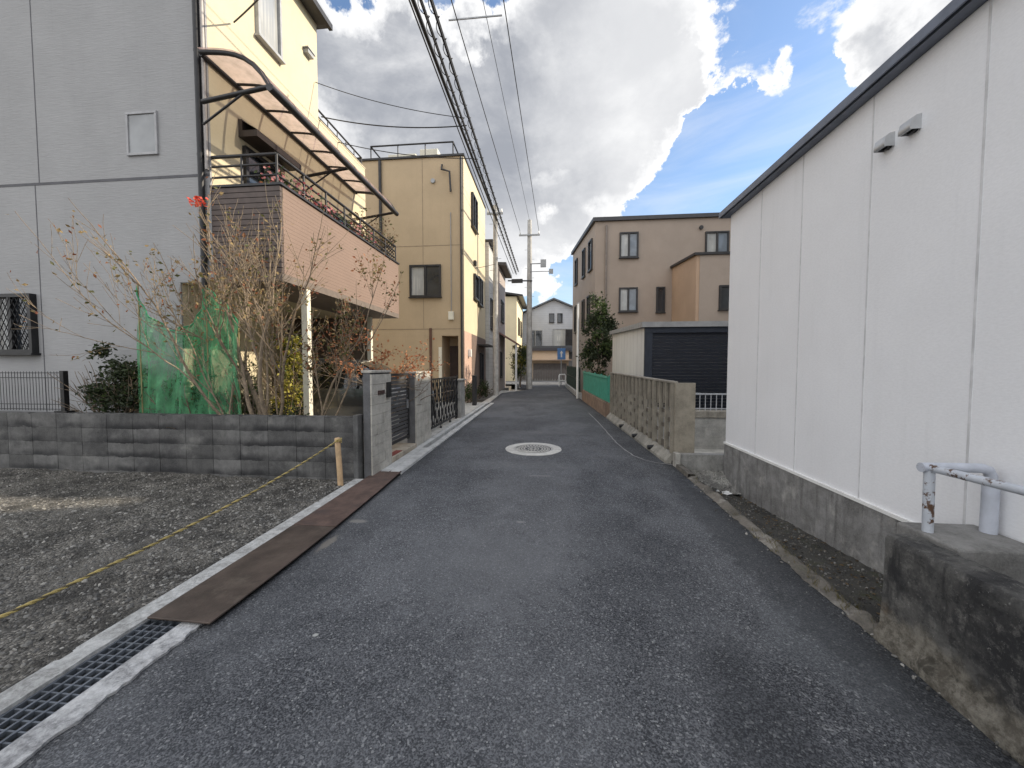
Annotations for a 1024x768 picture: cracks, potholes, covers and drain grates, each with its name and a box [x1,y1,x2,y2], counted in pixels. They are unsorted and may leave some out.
manhole cover [505,443,562,456]
drain grate [0,619,181,751]
